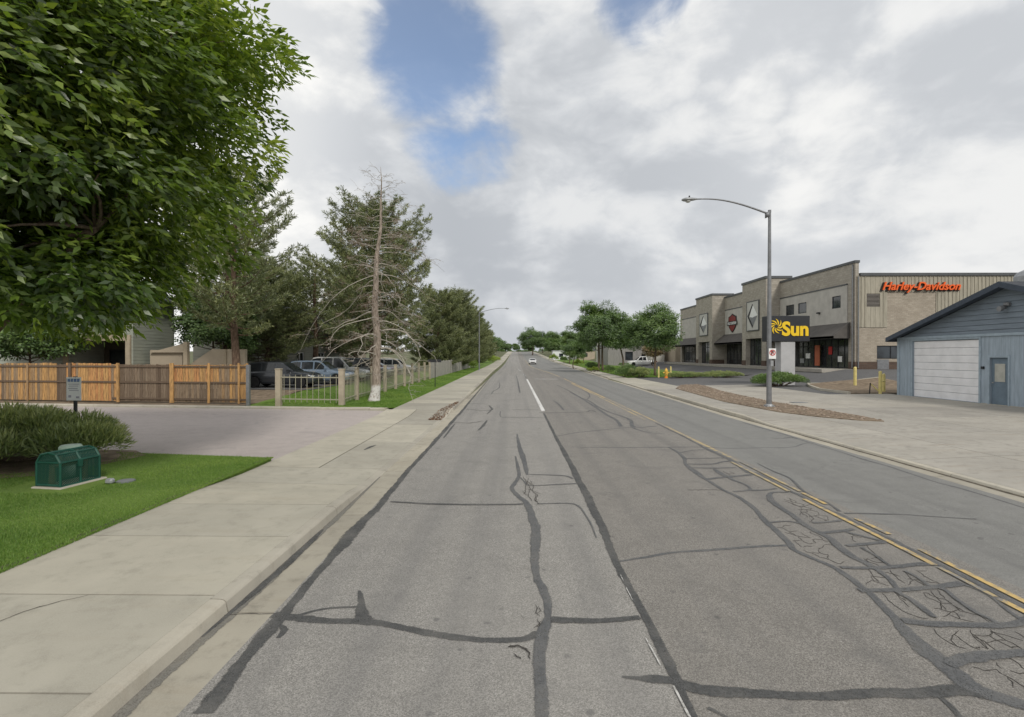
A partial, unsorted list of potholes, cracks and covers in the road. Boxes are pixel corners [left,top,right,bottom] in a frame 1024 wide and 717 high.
crack [592,423,1024,508]
